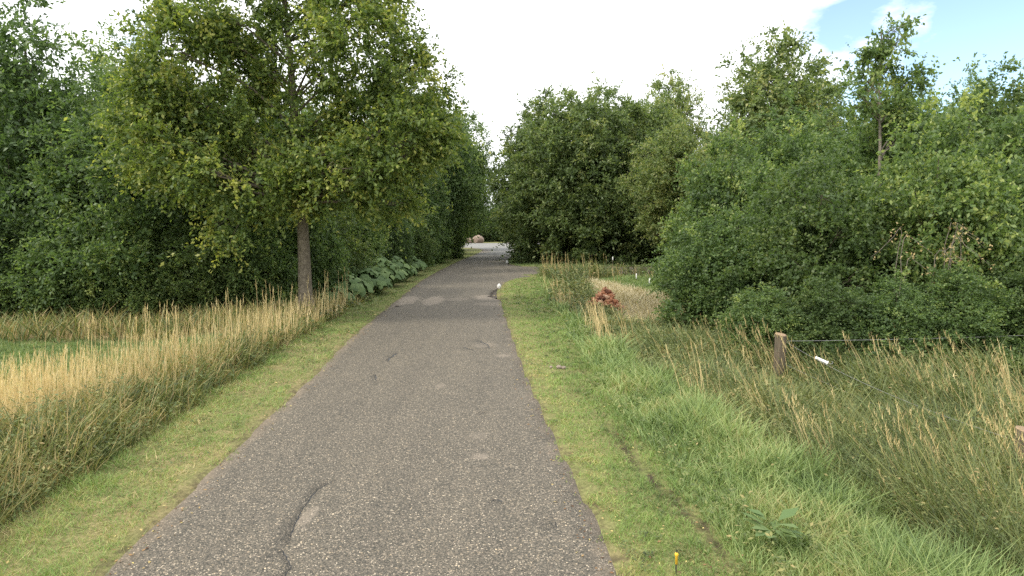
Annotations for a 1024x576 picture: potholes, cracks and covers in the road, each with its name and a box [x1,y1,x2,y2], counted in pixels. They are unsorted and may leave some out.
crack [281,479,340,576]
